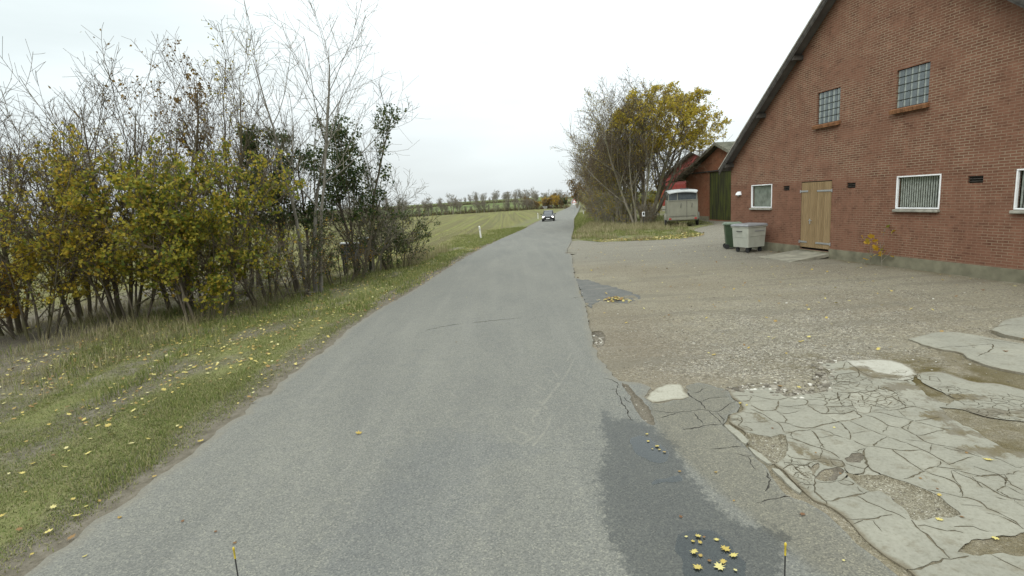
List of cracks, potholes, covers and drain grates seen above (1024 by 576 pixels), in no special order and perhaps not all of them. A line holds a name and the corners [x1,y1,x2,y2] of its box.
crack [605,378,633,421]
pothole [845,472,960,520]
pothole [745,432,788,465]
crack [655,361,1024,570]
pothole [592,331,606,348]
pothole [814,467,844,483]
